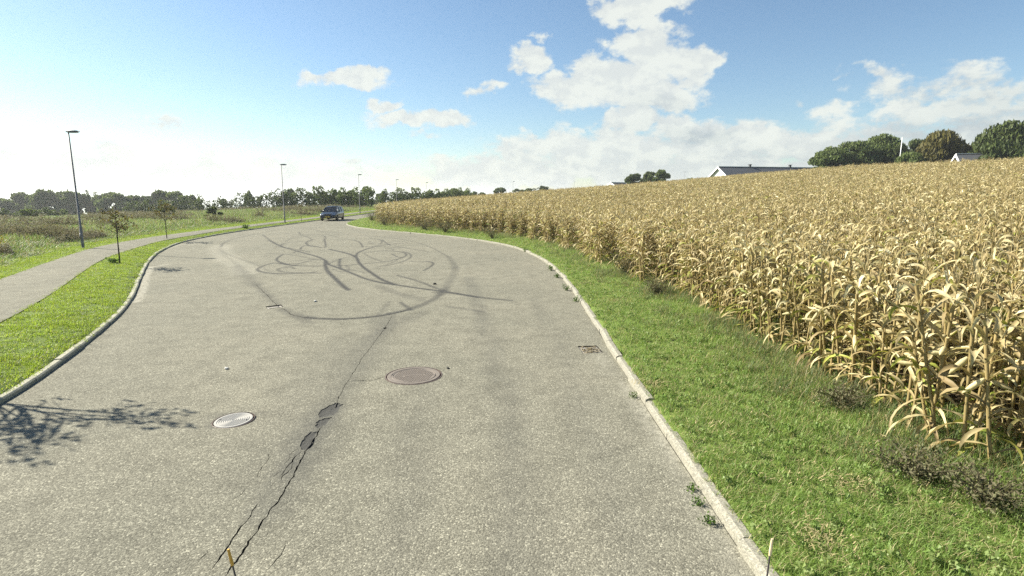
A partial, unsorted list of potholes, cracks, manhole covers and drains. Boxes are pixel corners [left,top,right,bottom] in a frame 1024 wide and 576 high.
manhole cover [211,412,255,428]
pothole [318,403,343,418]
crack [197,286,404,575]
pothole [300,432,317,450]
manhole cover [385,367,442,385]
drain grate [578,346,603,354]
